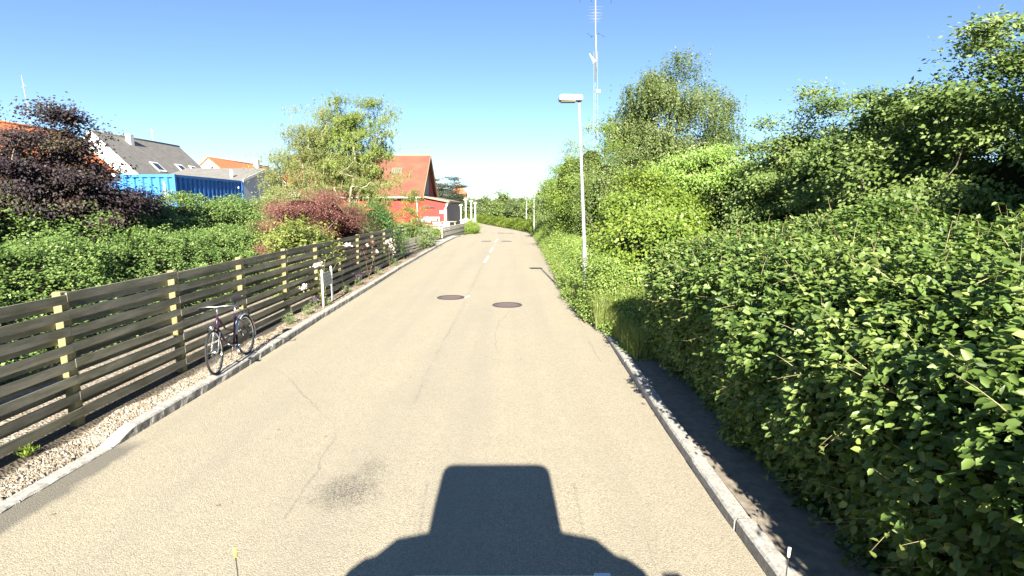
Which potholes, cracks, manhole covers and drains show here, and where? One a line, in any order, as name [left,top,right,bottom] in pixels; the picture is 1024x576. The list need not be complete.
crack [274,368,336,520]
